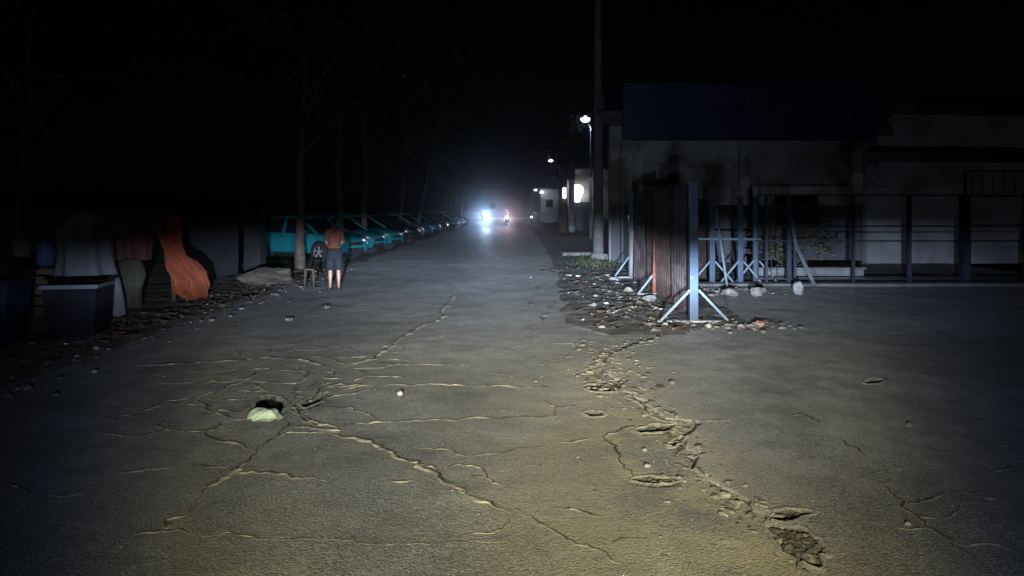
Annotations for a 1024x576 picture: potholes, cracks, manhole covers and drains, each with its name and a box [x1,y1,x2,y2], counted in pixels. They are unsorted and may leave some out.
pothole [578,409,609,419]
pothole [859,377,889,385]
pothole [249,393,291,414]
pothole [625,474,687,487]
crack [73,285,726,565]
pothole [630,422,682,435]
pothole [758,521,834,574]
crack [784,413,1024,564]
pothole [577,378,633,394]
pothole [764,506,821,524]
